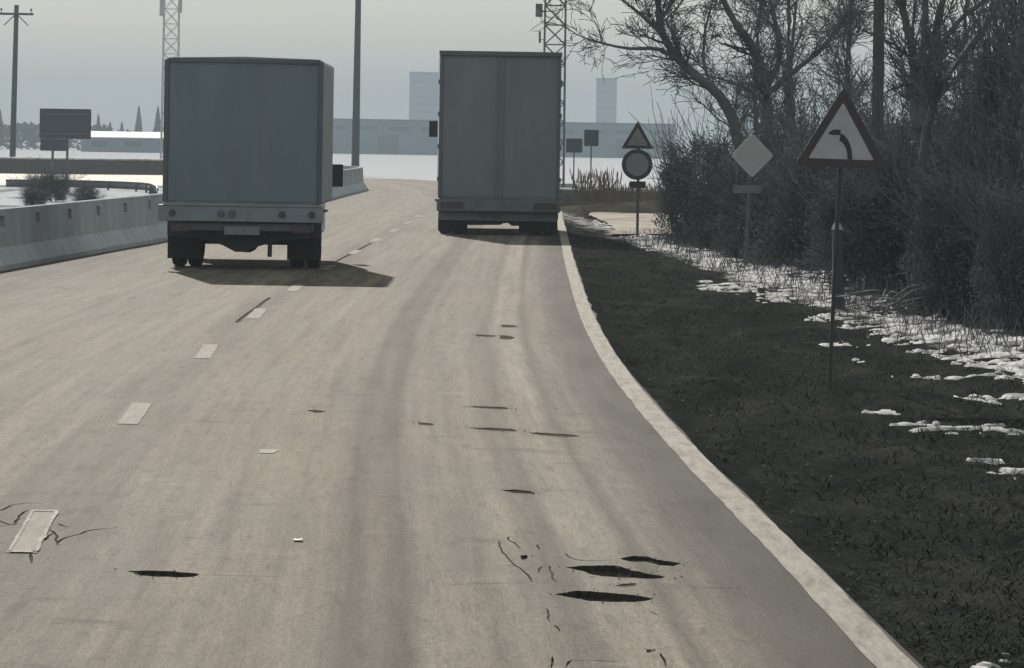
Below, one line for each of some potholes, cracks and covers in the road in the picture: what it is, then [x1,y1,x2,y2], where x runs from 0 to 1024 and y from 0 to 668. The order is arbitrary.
pothole [555,591,653,602]
crack [0,503,117,563]
pothole [621,556,679,566]
crack [452,537,602,585]
crack [550,656,619,668]
pothole [567,565,664,579]
